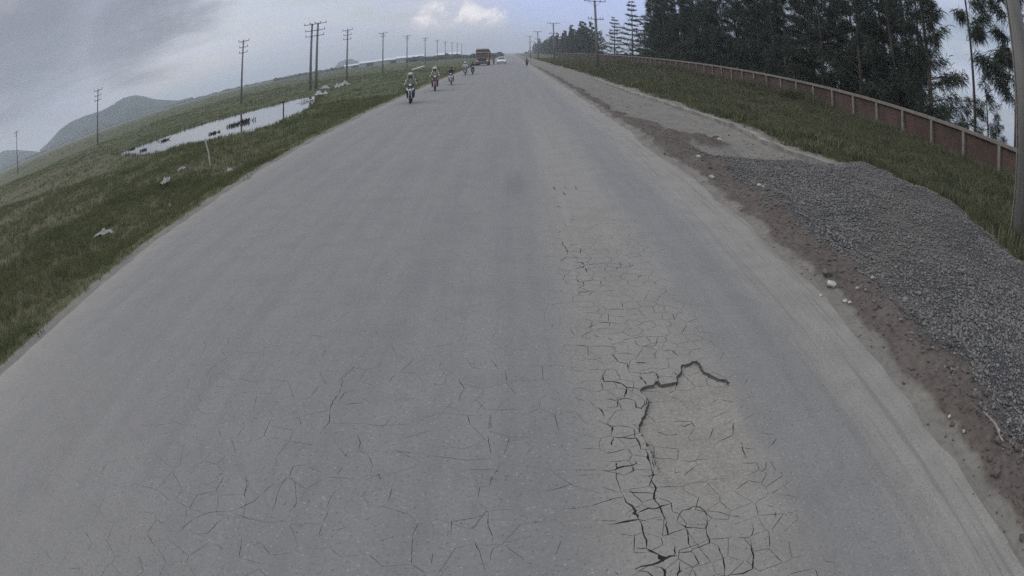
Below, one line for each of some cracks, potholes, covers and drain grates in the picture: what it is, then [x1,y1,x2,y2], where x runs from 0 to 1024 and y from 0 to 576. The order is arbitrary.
crack [46,313,448,576]
crack [380,217,837,576]
